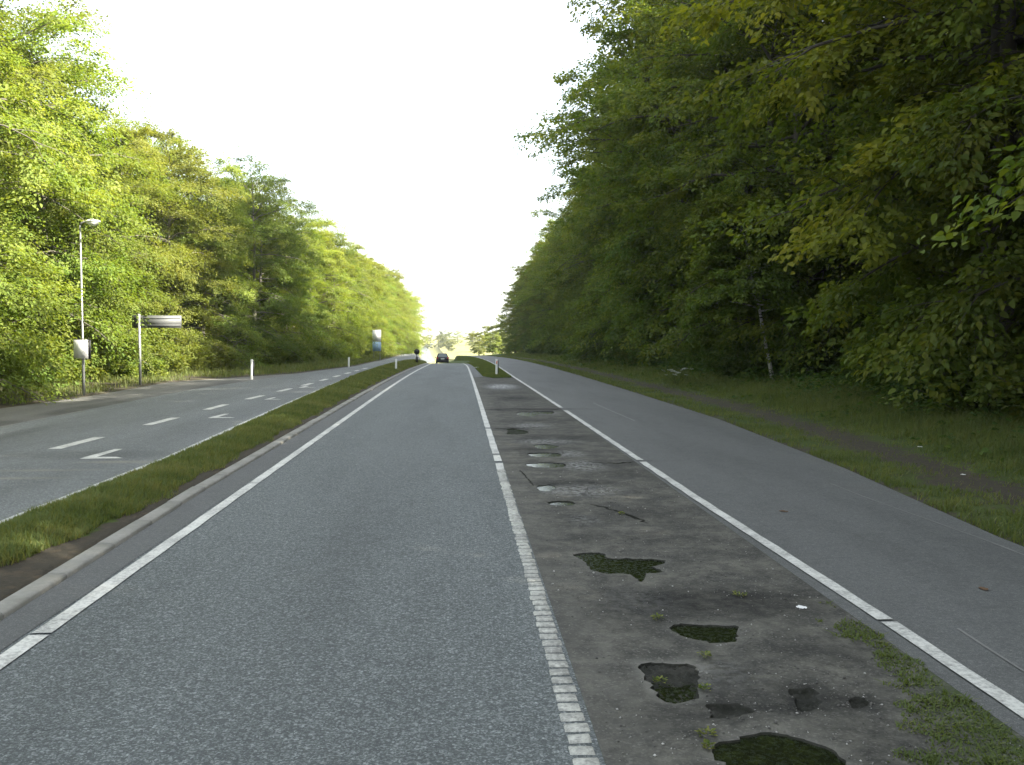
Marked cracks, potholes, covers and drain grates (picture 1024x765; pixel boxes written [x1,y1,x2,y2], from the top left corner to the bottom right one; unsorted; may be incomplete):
pothole [848,696,869,708]
crack [590,504,647,523]
pothole [670,623,739,643]
pothole [712,732,846,765]
pothole [638,662,700,704]
pothole [573,552,666,582]
pothole [705,703,755,719]
pothole [788,687,823,712]
